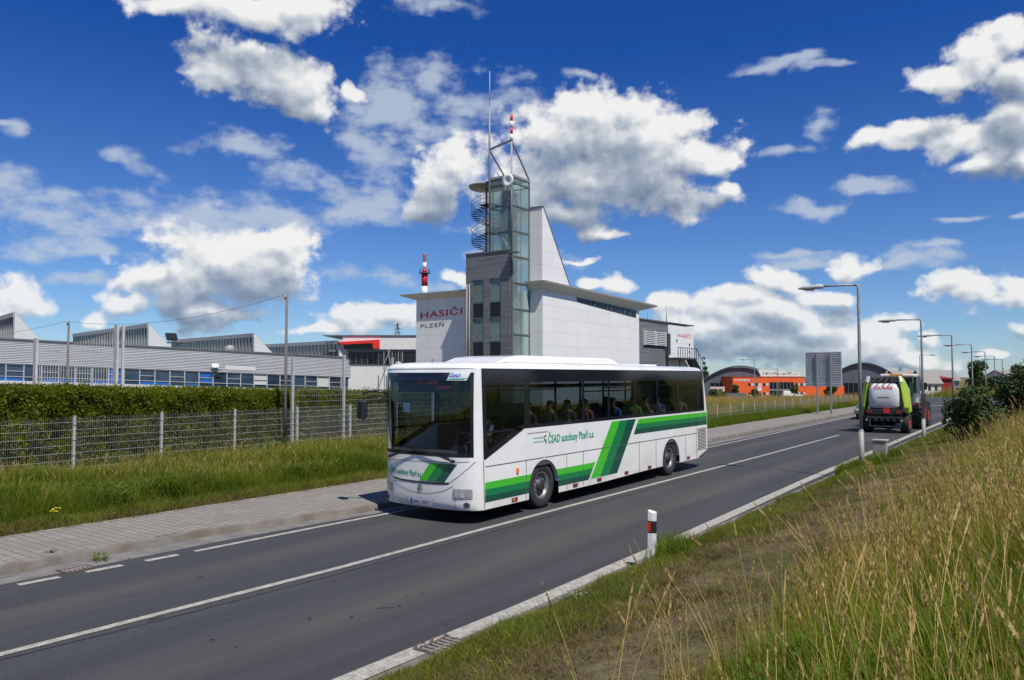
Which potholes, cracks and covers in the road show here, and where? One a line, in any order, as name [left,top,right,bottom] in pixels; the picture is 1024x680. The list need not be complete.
drain grate [55,564,97,574]
drain grate [415,636,462,655]
